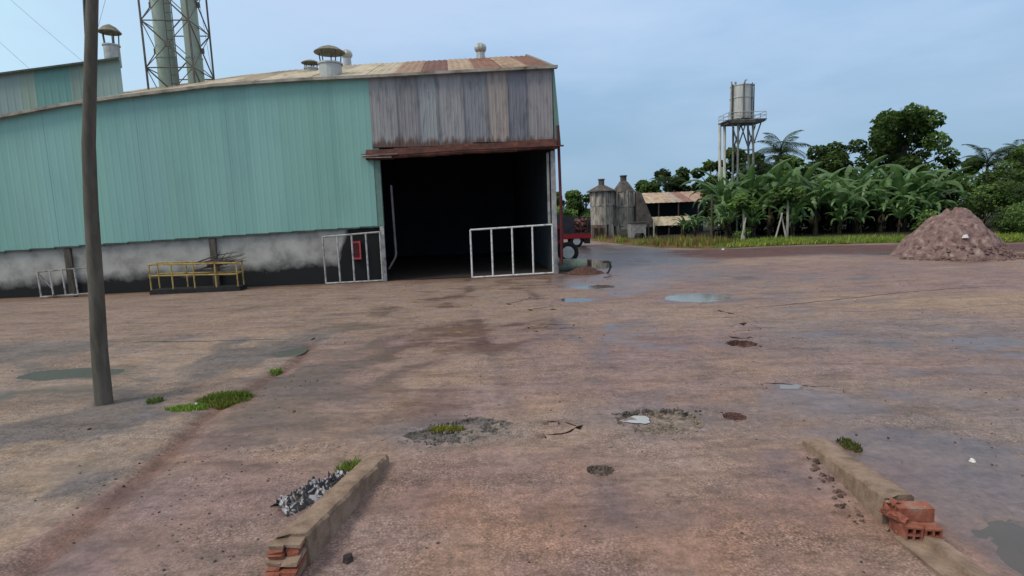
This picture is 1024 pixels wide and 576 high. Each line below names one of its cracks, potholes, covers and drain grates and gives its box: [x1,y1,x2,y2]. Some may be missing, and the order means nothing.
pothole [393,413,530,452]
pothole [608,403,716,440]
pothole [713,409,756,425]
pothole [577,462,625,482]
pothole [718,338,765,349]
